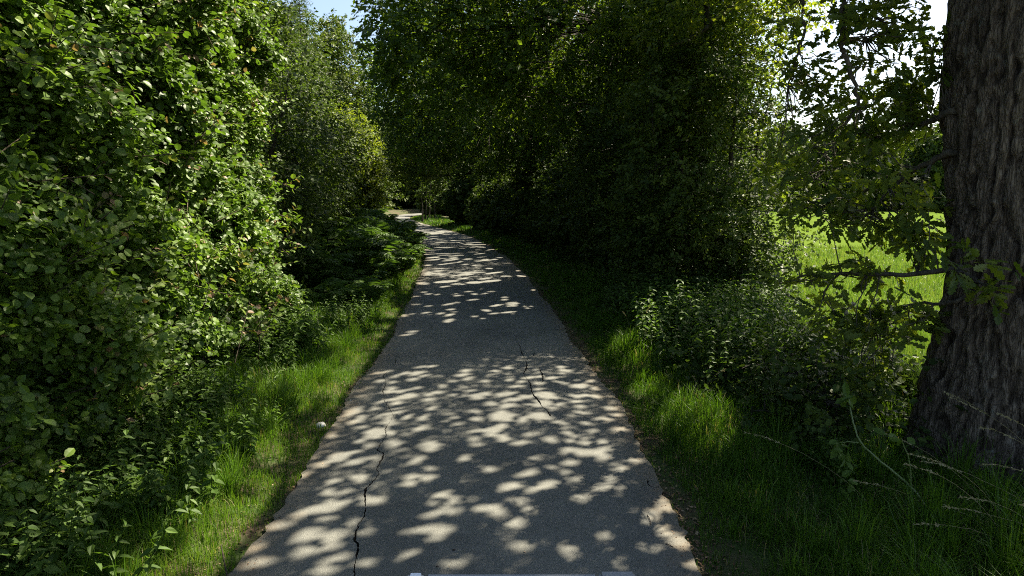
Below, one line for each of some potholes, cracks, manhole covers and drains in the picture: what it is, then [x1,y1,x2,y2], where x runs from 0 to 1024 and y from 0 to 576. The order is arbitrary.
crack [519,345,551,416]
crack [353,359,396,576]
